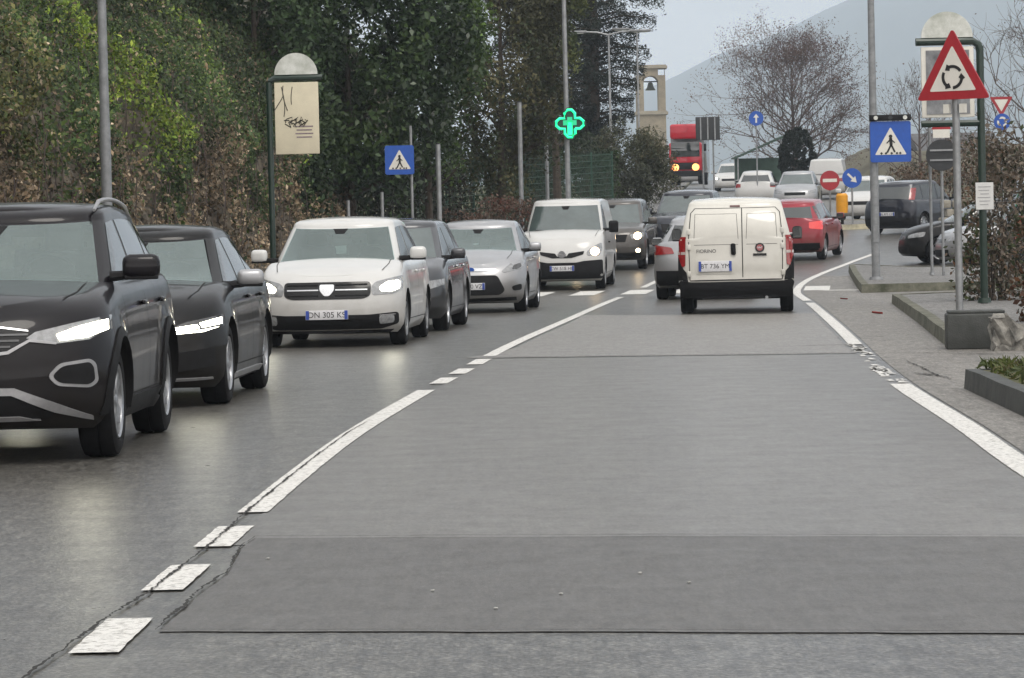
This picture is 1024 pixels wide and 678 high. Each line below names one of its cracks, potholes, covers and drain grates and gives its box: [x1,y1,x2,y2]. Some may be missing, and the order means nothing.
crack [907,352,991,379]
